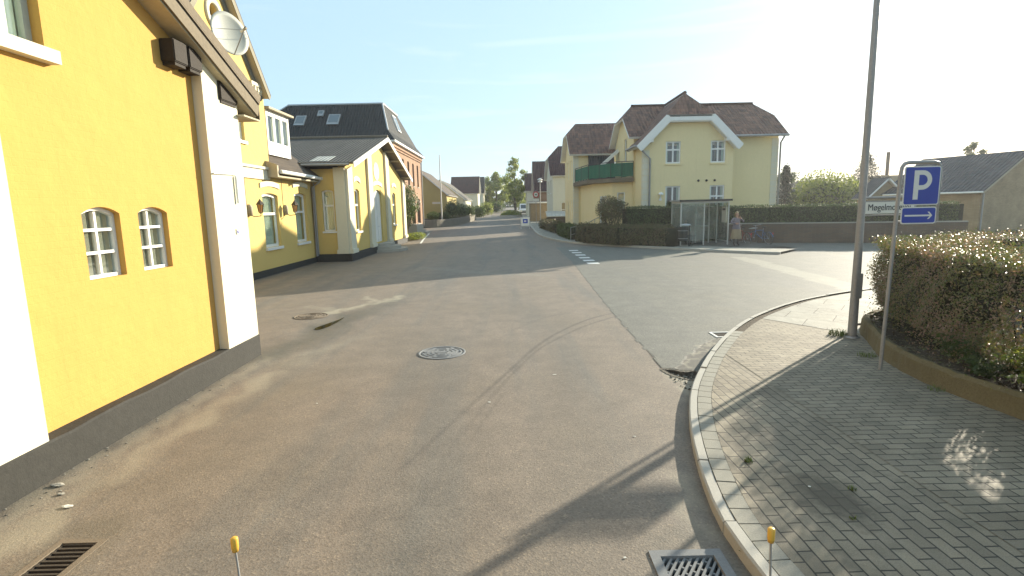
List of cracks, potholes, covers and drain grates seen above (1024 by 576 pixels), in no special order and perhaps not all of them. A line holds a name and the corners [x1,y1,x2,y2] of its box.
manhole cover [418,346,466,359]
drain grate [648,549,736,576]
drain grate [13,538,109,576]
pothole [659,368,698,390]
